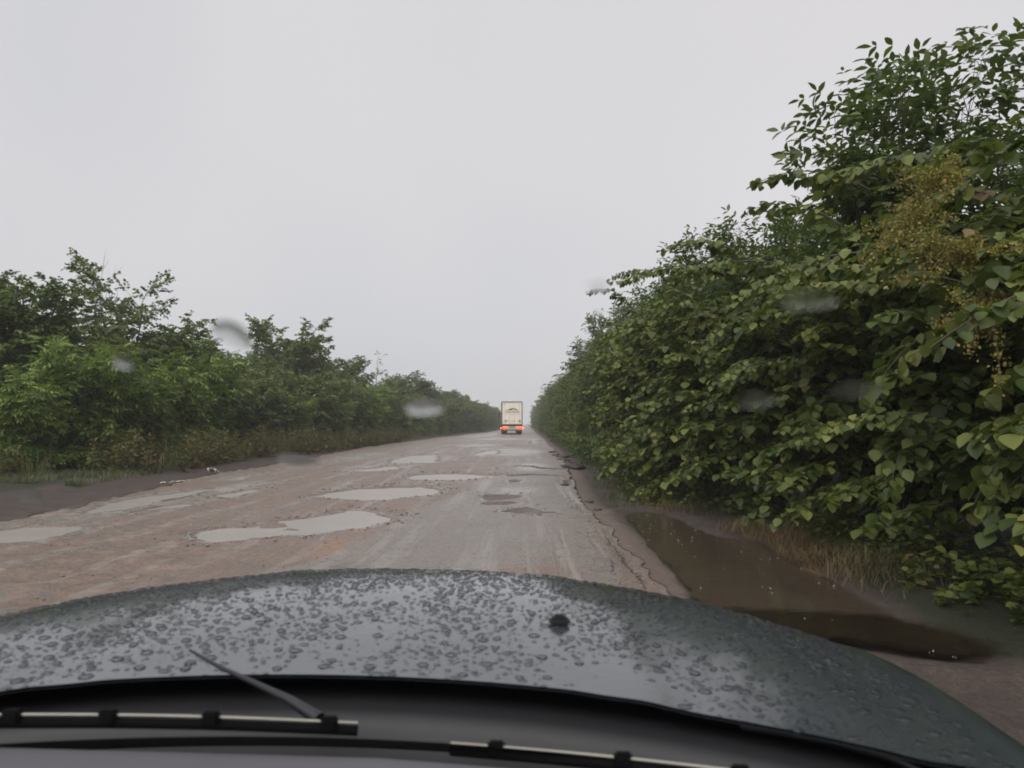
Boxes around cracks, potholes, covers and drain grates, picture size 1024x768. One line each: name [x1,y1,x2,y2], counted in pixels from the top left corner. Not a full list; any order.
pothole [190,509,397,542]
crack [605,536,647,589]
pothole [388,454,442,464]
pothole [0,525,89,543]
pothole [302,485,443,501]
pothole [211,489,262,499]
pothole [73,487,216,516]
